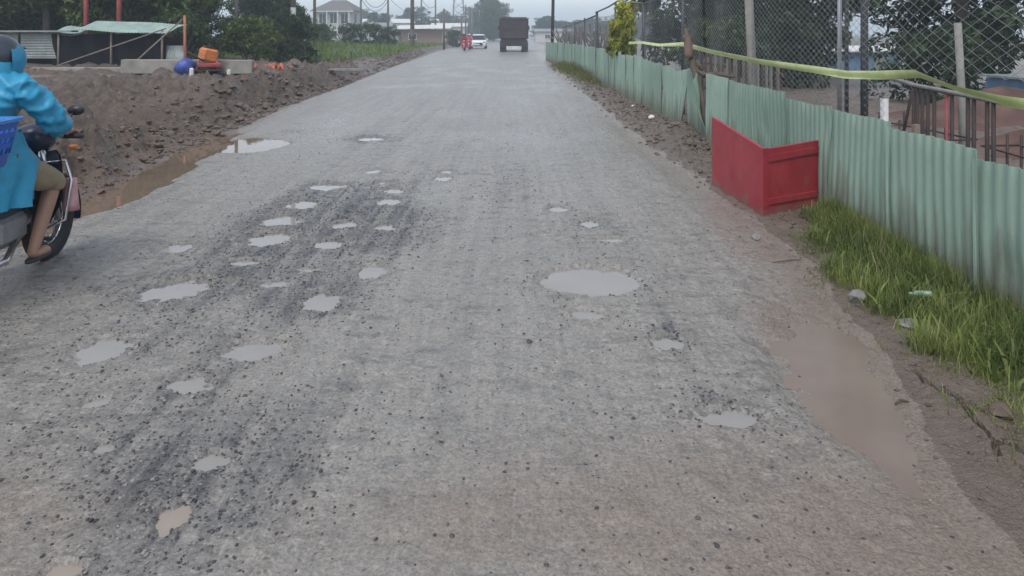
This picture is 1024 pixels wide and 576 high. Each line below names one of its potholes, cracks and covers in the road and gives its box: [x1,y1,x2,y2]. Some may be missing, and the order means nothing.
pothole [292,283,349,317]
pothole [298,181,355,194]
pothole [183,441,241,473]
pothole [641,330,695,351]
pothole [292,235,361,250]
pothole [158,370,226,396]
pothole [95,267,248,309]
pothole [225,225,317,249]
pothole [678,397,782,435]
pothole [347,259,395,287]
pothole [54,326,151,373]
pothole [565,304,625,320]
